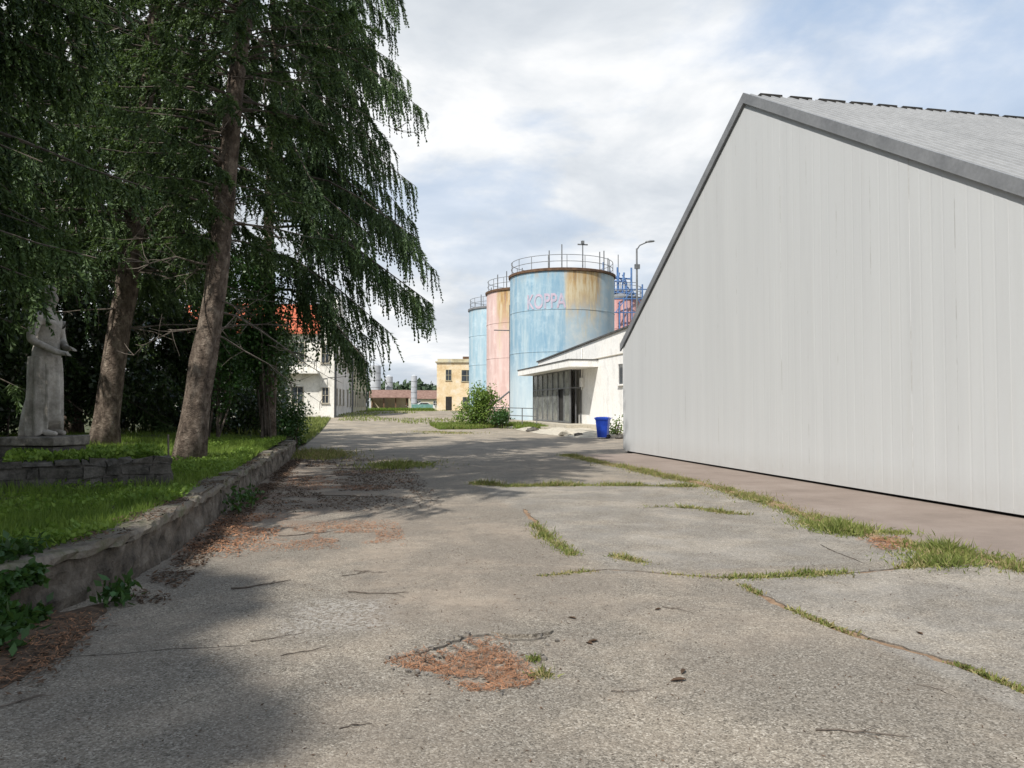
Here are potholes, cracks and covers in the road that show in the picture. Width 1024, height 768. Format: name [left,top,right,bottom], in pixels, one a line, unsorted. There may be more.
crack [537,544,904,579]
crack [56,645,248,658]
crack [523,509,564,551]
pothole [385,628,559,696]
